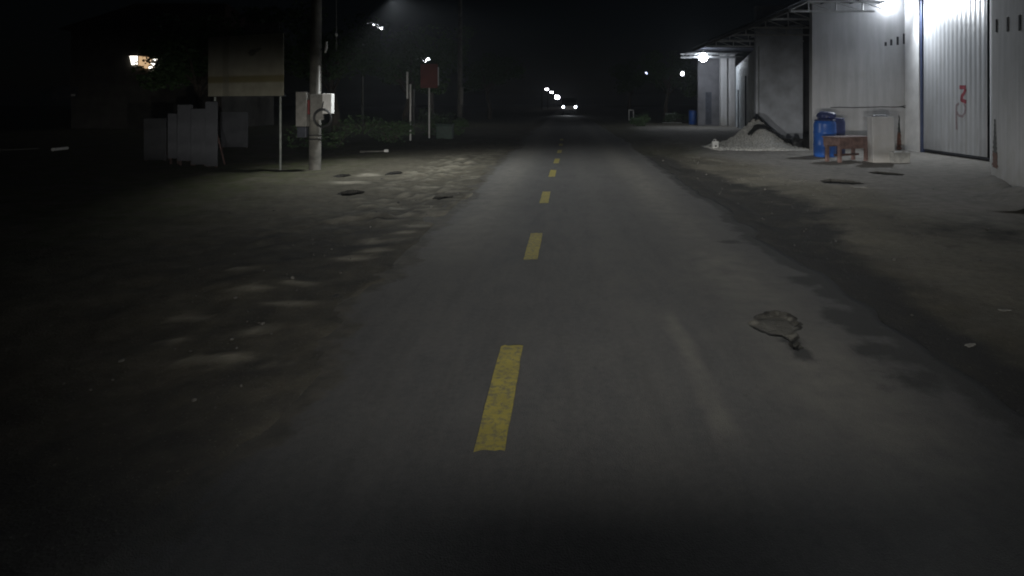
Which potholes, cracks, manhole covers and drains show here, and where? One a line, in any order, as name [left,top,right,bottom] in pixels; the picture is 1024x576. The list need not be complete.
pothole [748,310,804,351]
